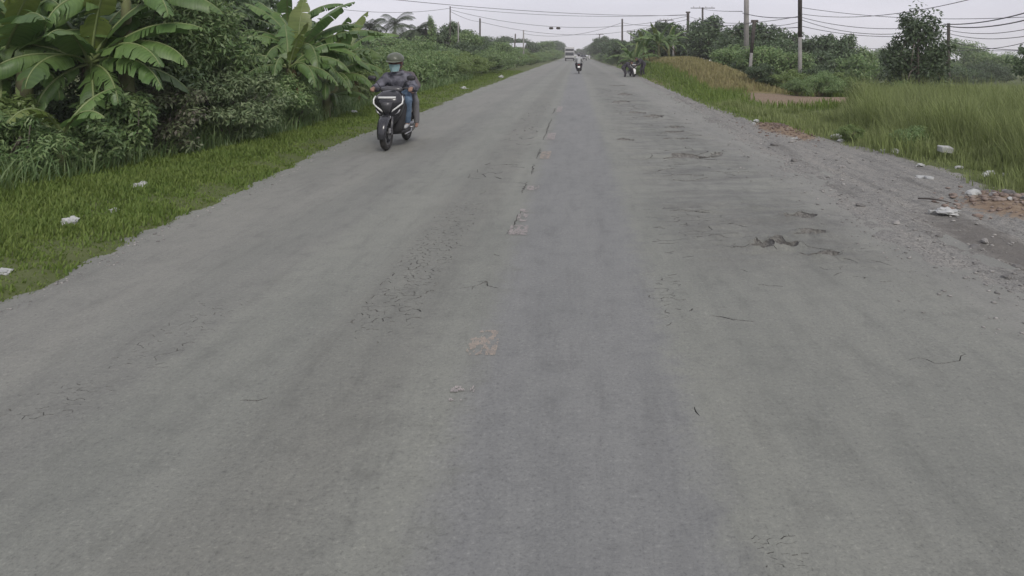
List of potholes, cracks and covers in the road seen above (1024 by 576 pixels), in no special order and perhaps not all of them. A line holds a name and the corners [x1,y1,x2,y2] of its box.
crack [350,203,483,343]
pothole [767,234,799,247]
crack [468,102,555,194]
